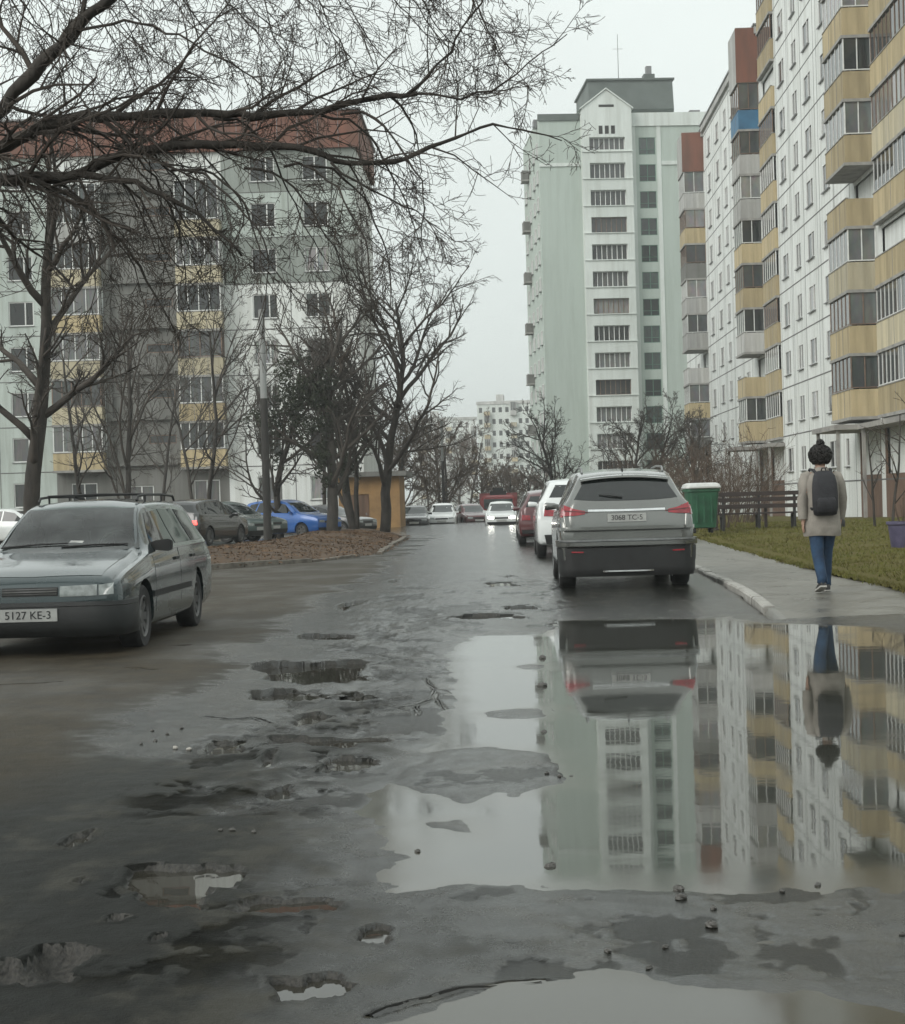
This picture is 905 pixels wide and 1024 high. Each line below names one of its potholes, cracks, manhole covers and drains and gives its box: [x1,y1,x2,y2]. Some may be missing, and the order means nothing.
pothole [218,895,351,917]
pothole [246,659,376,685]
pothole [109,861,250,911]
pothole [258,970,362,1005]
pothole [257,784,301,802]
pothole [346,922,400,948]
pothole [52,827,103,851]
pothole [257,734,399,750]
pothole [141,931,176,944]
pothole [315,754,384,774]
pothole [196,739,253,756]
pothole [327,691,383,702]
